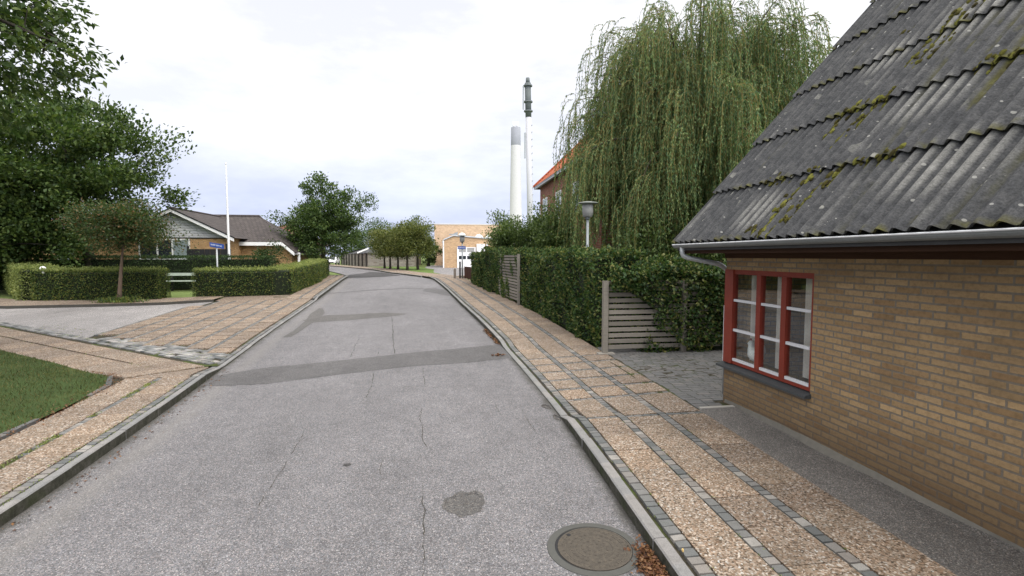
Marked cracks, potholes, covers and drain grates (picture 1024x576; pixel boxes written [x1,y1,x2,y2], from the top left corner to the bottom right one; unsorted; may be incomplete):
manhole cover [547,523,640,576]
